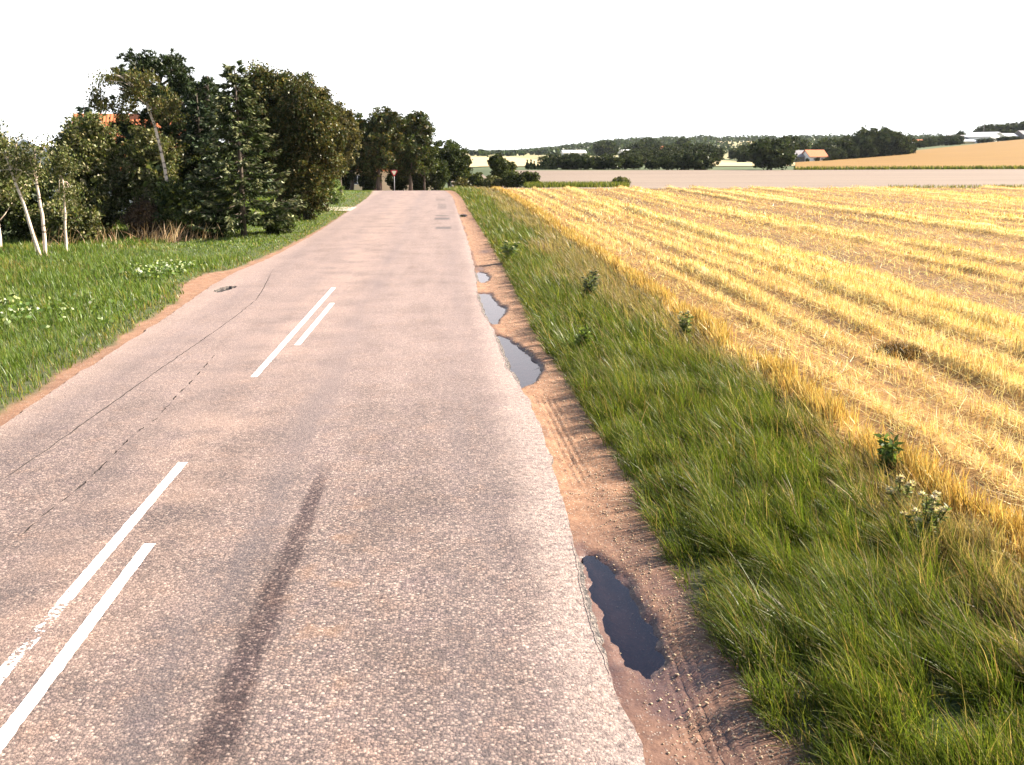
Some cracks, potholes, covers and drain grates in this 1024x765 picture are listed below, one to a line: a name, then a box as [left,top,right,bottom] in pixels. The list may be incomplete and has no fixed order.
pothole [571,542,669,679]
crack [1,270,273,534]
pothole [494,334,544,388]
pothole [477,292,508,324]
pothole [474,271,490,283]
